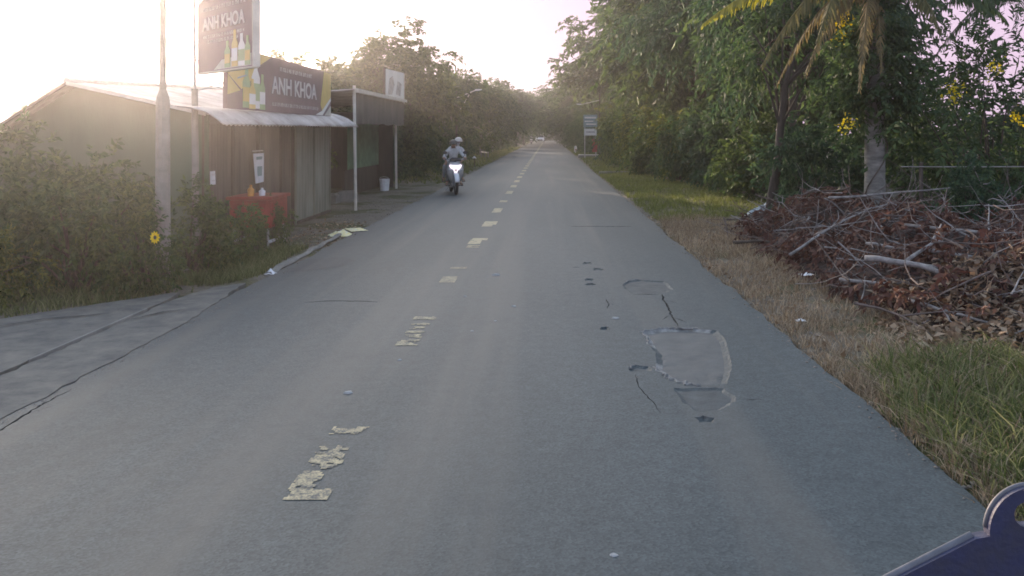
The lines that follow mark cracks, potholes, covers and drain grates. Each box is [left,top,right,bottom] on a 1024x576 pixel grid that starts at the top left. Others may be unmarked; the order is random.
pothole [629,364,652,372]
crack [606,294,685,326]
pothole [674,388,736,412]
pothole [638,327,732,386]
